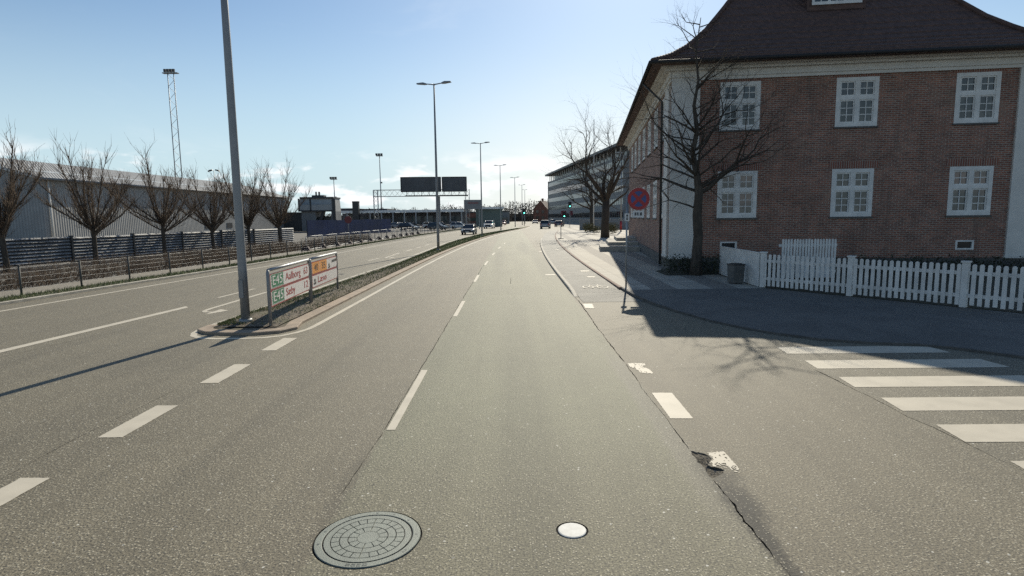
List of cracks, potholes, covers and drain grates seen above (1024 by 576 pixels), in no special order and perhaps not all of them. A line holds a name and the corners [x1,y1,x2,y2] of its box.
manhole cover [312,511,422,570]
manhole cover [556,522,588,539]
pothole [691,451,724,478]
